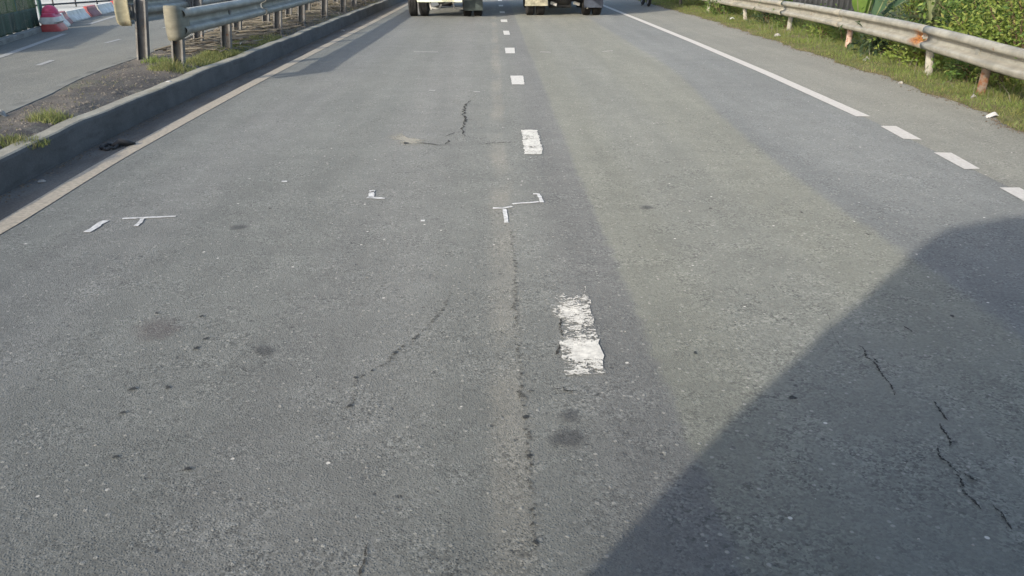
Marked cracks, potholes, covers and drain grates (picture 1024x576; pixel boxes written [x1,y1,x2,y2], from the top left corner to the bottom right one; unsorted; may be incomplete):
crack [859,345,896,395]
crack [934,402,1012,530]
crack [425,100,472,145]
